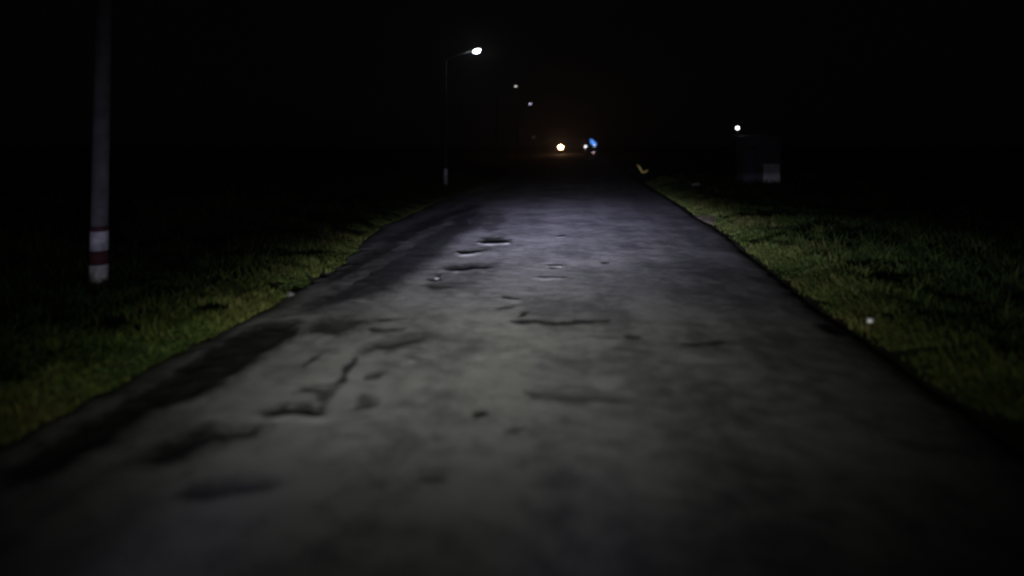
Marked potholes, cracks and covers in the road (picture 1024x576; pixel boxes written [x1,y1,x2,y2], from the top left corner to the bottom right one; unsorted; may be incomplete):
pothole [475,235,514,245]
pothole [455,247,494,256]
pothole [441,262,500,273]
pothole [518,385,639,407]
pothole [166,473,286,506]
crack [300,353,359,413]
pothole [472,408,490,418]
